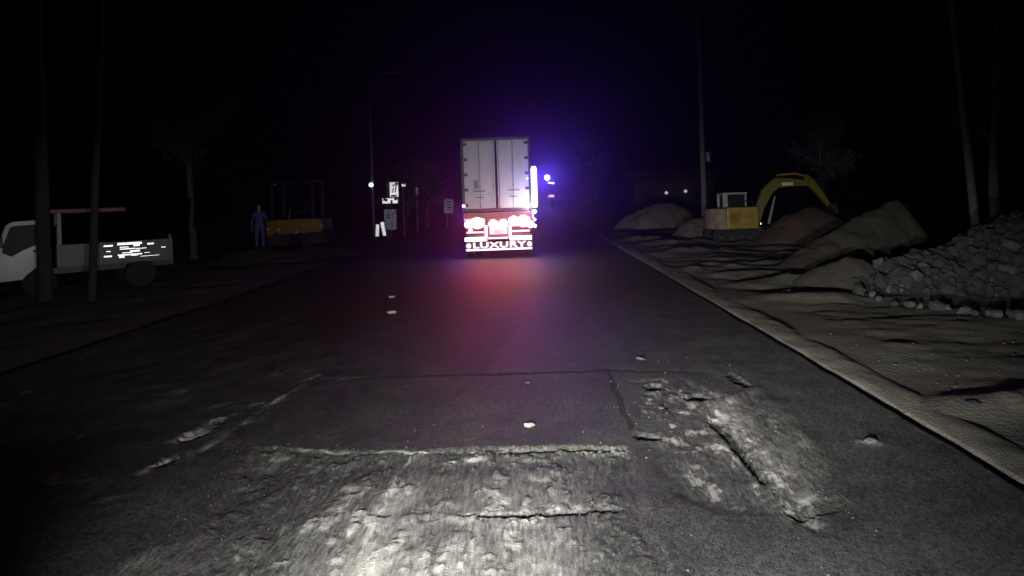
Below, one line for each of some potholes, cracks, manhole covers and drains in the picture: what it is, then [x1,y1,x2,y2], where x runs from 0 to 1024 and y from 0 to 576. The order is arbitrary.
pothole [637,382,669,393]
pothole [718,369,759,391]
crack [355,369,703,437]
pothole [698,417,777,489]
pothole [625,429,670,445]
pothole [676,391,714,404]
pothole [655,400,676,412]
